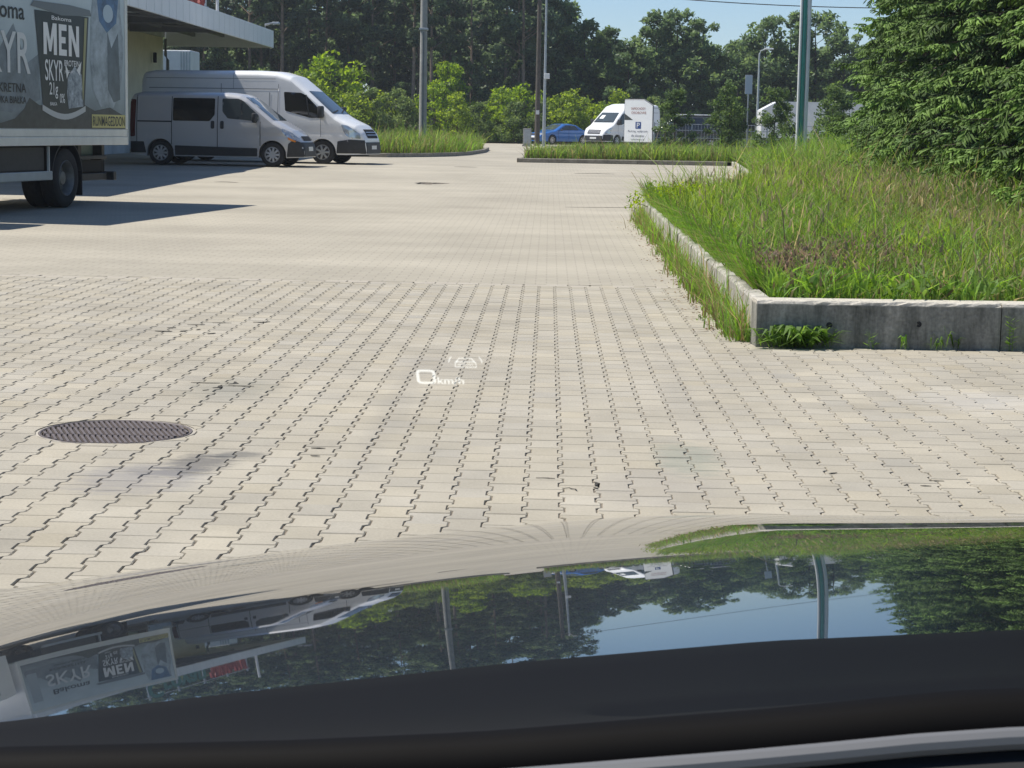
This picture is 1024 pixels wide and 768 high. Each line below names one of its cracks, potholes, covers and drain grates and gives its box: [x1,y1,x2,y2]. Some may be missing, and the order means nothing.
manhole cover [35,420,196,444]
